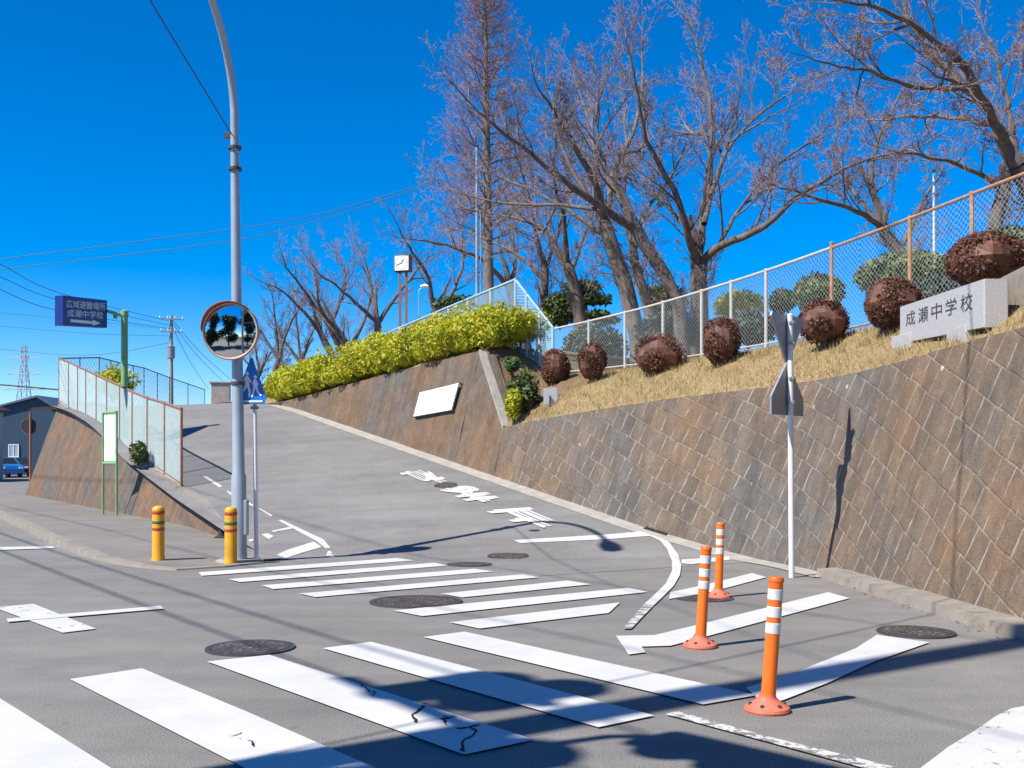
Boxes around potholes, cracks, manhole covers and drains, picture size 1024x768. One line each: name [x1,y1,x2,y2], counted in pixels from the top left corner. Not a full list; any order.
manhole cover [876,625,957,639]
manhole cover [205,639,295,657]
crack [411,703,480,751]
manhole cover [369,595,462,609]
